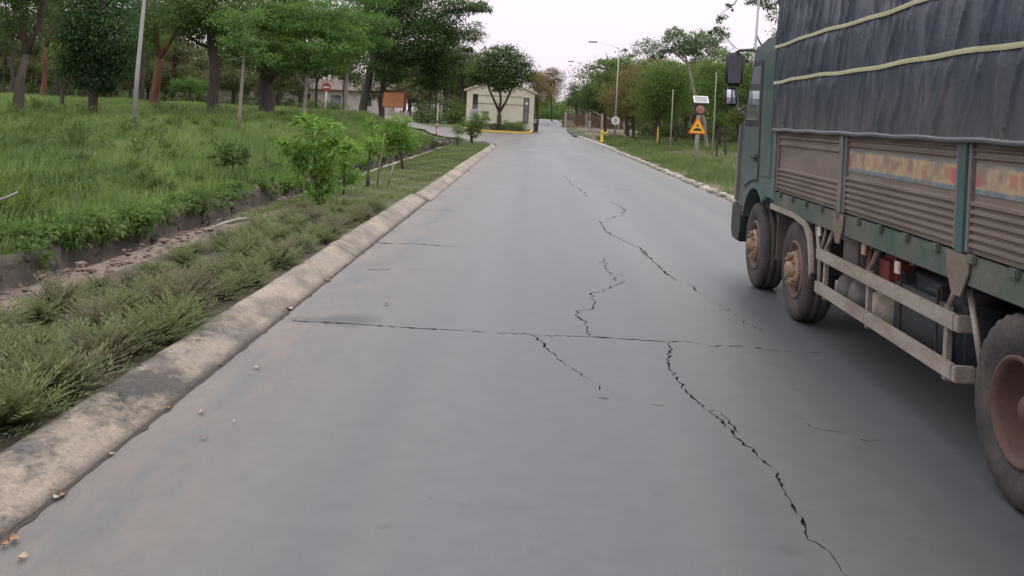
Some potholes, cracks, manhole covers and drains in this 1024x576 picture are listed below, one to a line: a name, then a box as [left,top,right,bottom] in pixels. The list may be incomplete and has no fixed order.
crack [667,342,845,575]
crack [599,204,756,328]
crack [529,334,609,399]
crack [575,259,625,337]
